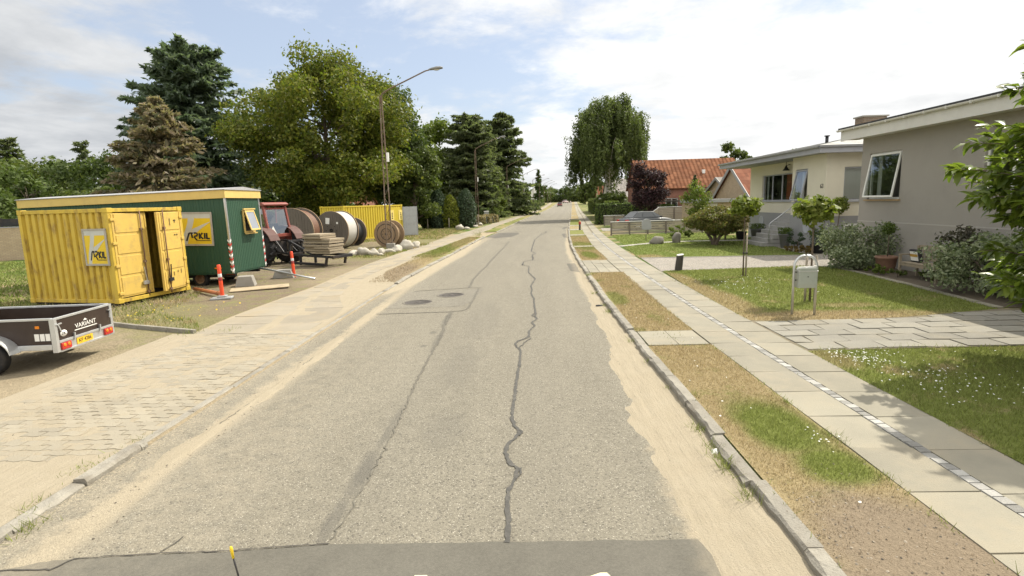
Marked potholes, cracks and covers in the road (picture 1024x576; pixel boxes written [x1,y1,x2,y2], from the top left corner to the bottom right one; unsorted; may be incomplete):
crack [0,241,510,571]
